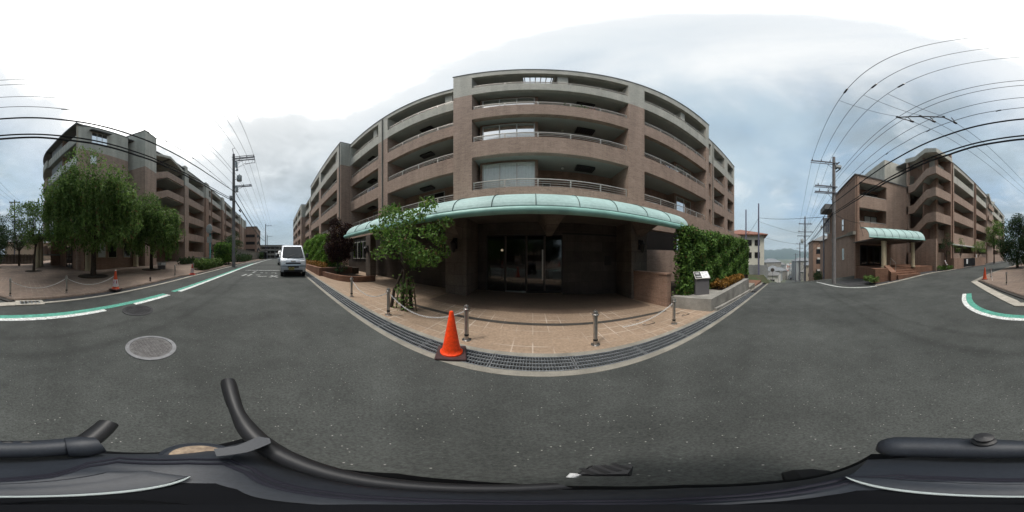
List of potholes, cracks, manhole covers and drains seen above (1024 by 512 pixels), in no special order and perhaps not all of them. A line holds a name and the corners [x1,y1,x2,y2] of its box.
manhole cover [122,305,153,316]
drain grate [338,299,364,311]
drain grate [376,322,431,347]
drain grate [571,346,647,370]
drain grate [488,353,578,371]
drain grate [353,309,390,326]
drain grate [675,320,713,336]
drain grate [634,332,689,354]
drain grate [418,339,494,367]
manhole cover [125,336,176,360]
